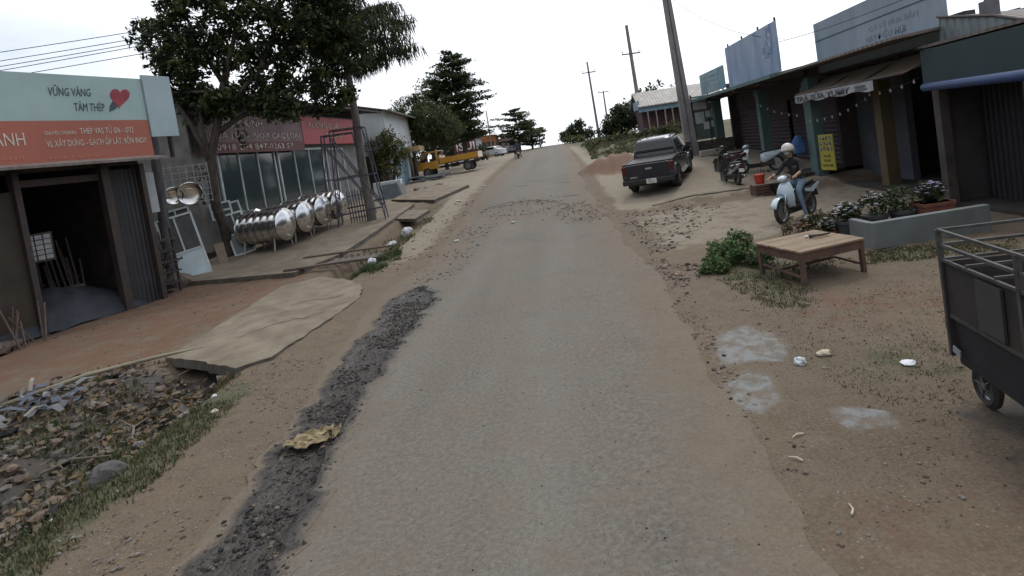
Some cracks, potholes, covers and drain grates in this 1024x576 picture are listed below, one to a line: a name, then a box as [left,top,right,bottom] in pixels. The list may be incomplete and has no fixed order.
pothole [165,284,444,576]
